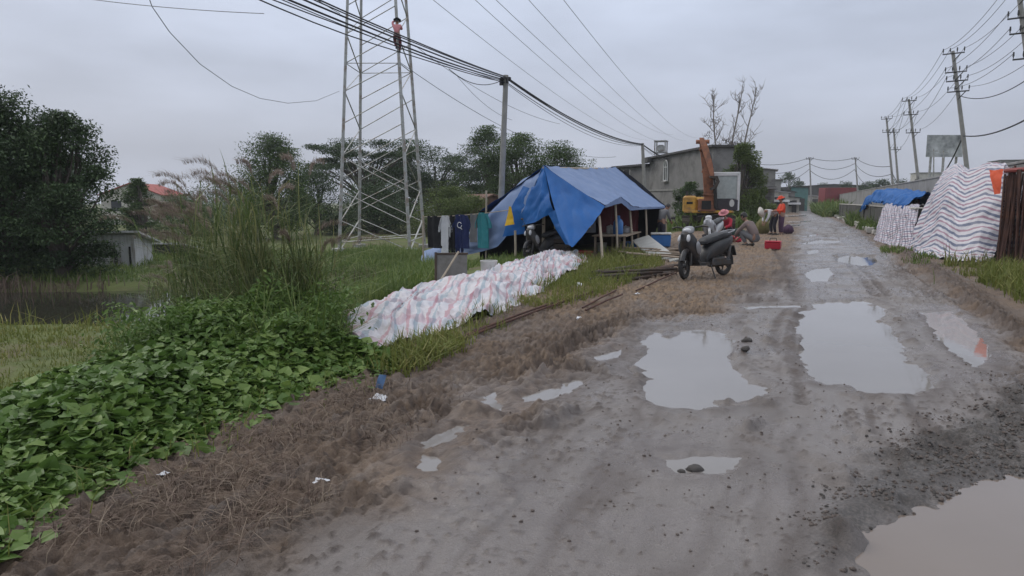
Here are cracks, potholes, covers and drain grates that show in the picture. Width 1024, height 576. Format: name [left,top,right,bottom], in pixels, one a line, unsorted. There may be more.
pothole [831,253,884,266]
pothole [781,296,958,399]
pothole [913,308,1010,370]
pothole [613,324,788,413]
pothole [646,445,762,482]
pothole [823,452,1024,576]
